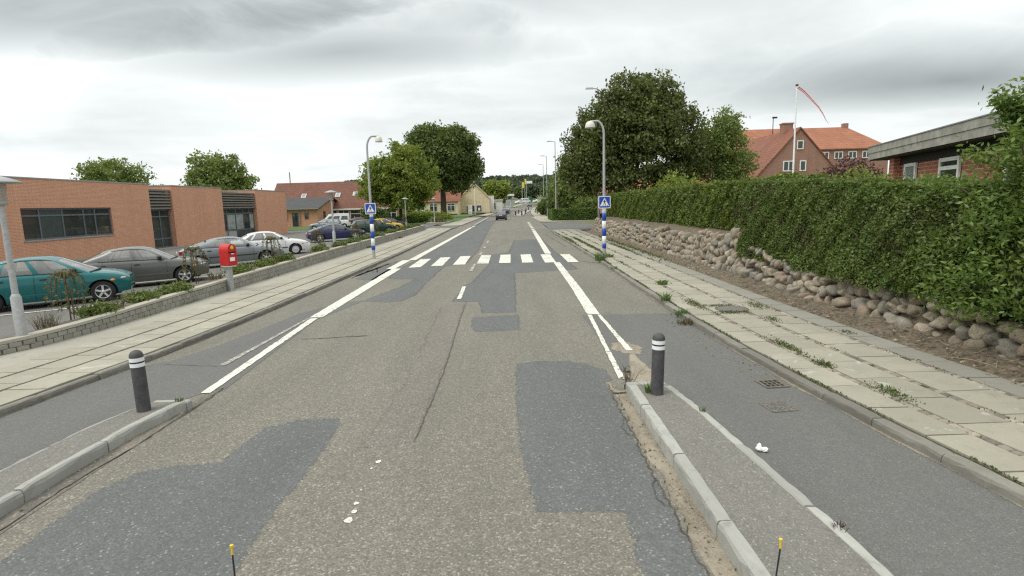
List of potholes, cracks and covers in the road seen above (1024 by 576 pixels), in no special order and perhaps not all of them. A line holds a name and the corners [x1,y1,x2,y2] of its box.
drain grate [754,379,791,389]
manhole cover [758,401,799,413]
